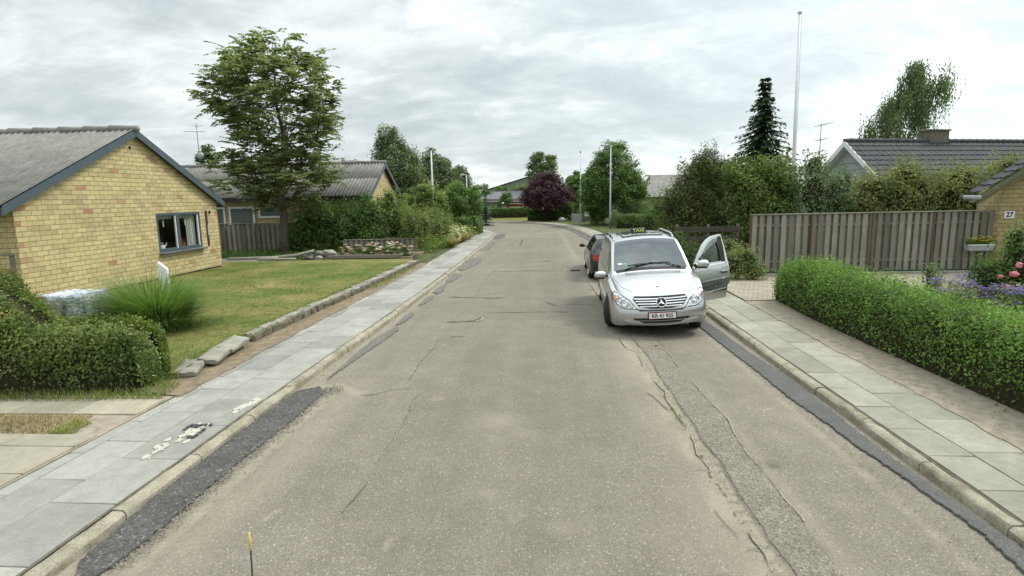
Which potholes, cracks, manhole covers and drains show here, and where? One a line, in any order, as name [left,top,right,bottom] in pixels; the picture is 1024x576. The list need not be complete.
crack [619,328,835,575]
